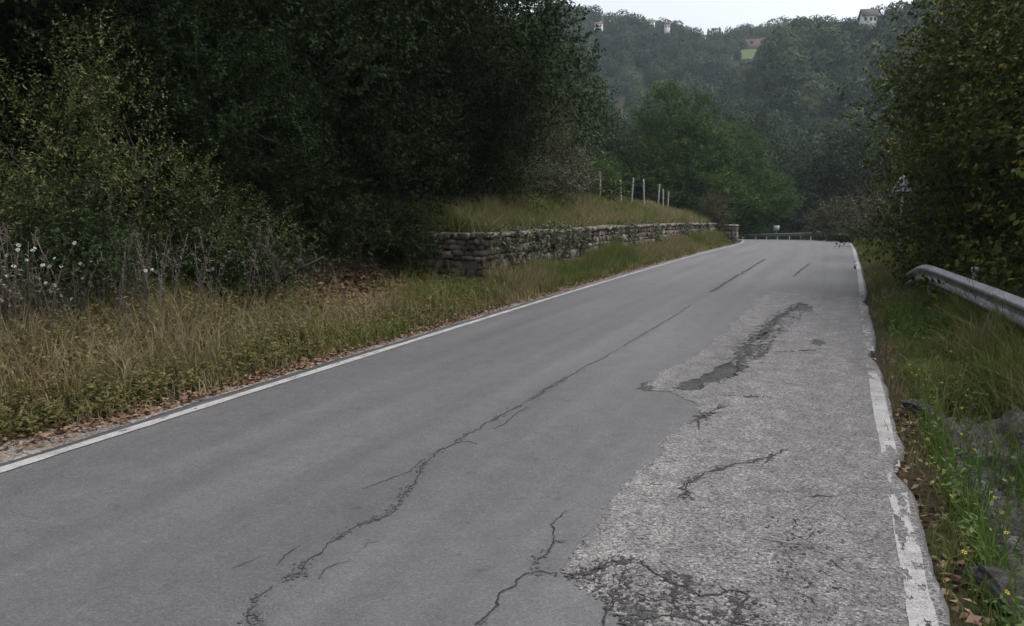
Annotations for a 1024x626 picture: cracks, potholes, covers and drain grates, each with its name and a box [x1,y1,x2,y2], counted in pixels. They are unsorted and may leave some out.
crack [474,511,768,626]
crack [648,449,787,500]
crack [692,394,771,430]
crack [717,302,822,384]
crack [233,305,690,626]
pothole [672,363,740,391]
